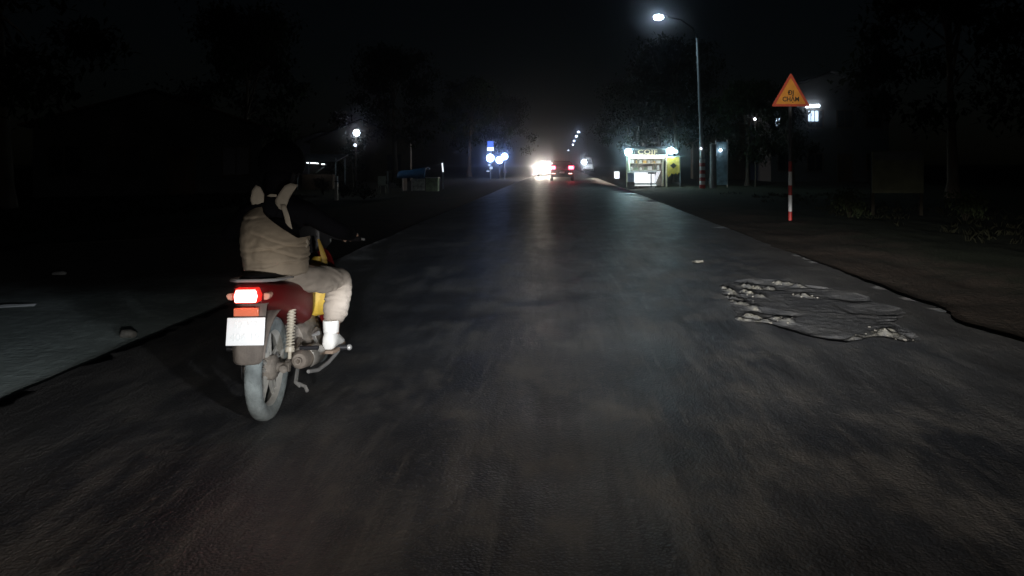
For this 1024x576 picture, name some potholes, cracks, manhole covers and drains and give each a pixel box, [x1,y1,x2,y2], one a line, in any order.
pothole [719,278,921,343]
